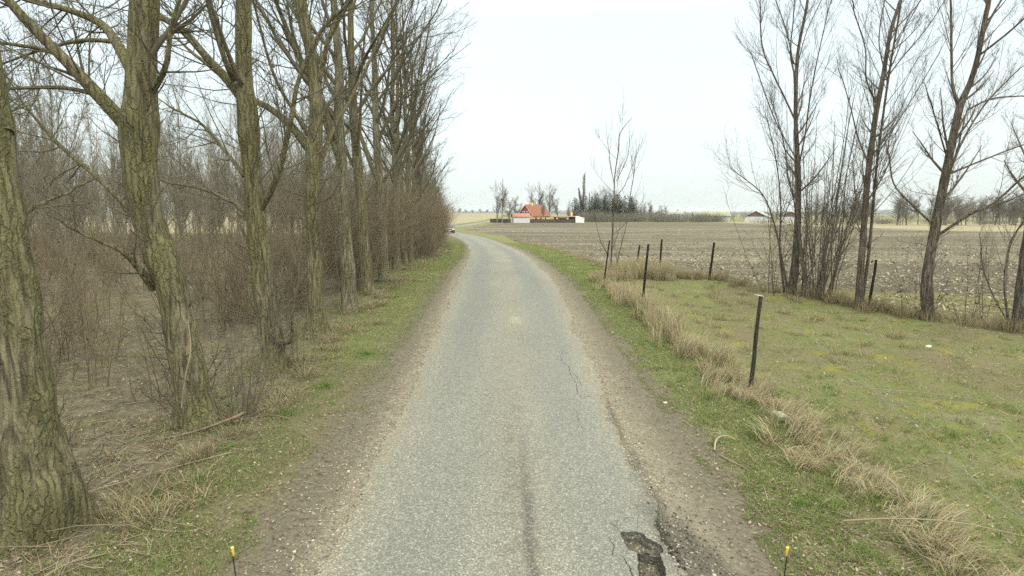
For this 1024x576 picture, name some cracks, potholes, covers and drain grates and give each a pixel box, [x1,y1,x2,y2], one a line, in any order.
pothole [619,531,666,576]
crack [609,511,639,576]
